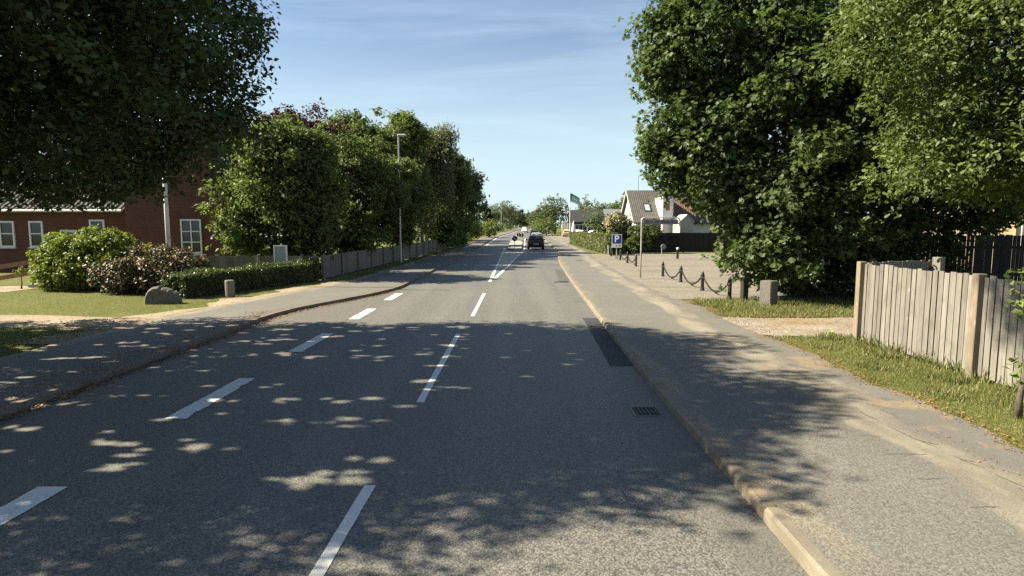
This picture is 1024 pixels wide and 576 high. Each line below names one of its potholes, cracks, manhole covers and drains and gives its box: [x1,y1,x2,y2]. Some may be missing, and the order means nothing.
drain grate [628,406,665,417]
